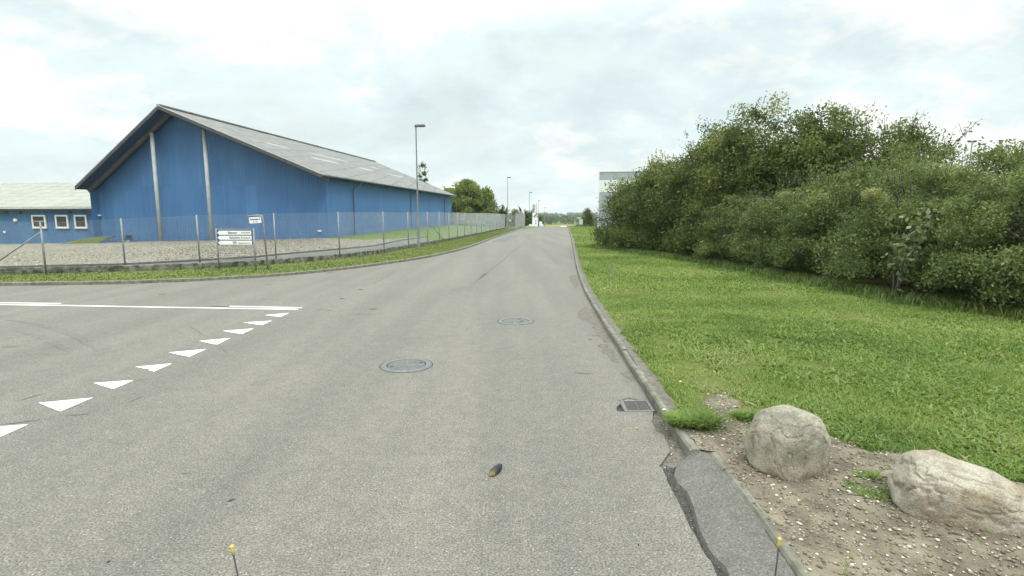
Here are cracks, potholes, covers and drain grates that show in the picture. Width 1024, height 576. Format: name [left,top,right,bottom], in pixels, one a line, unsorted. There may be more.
drain grate [620,400,655,416]
manhole cover [379,358,433,373]
